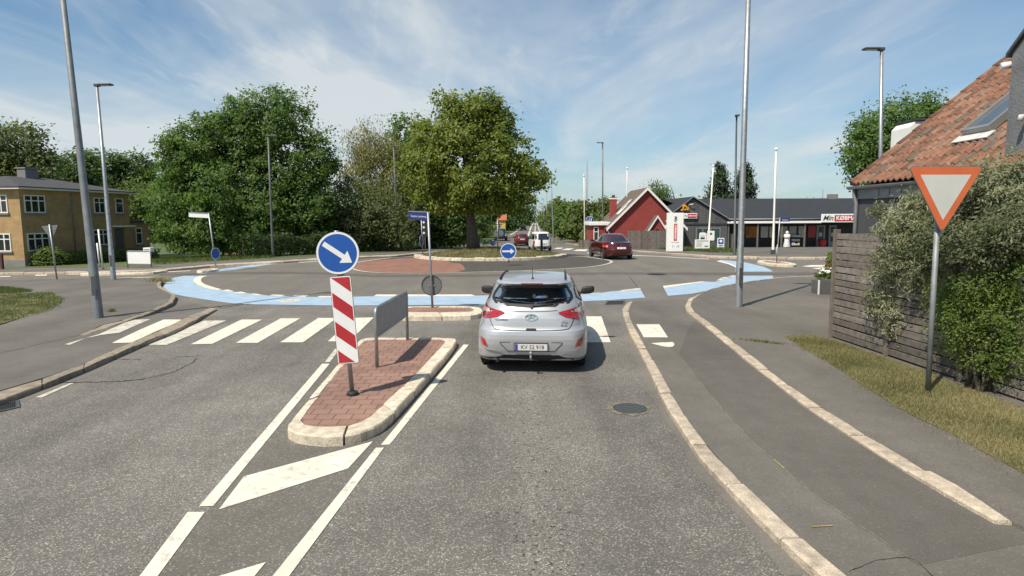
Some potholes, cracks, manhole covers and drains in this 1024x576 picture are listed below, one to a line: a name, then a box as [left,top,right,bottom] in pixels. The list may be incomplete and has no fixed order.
manhole cover [603,401,651,416]
crack [63,355,200,383]
drain grate [0,400,20,412]
